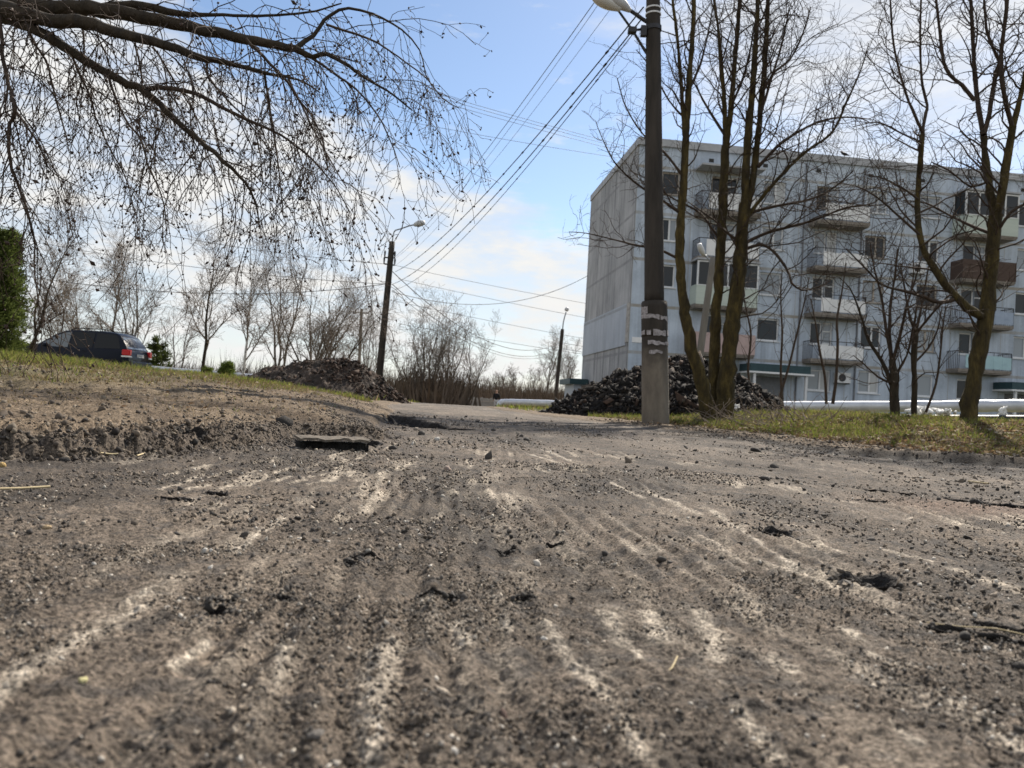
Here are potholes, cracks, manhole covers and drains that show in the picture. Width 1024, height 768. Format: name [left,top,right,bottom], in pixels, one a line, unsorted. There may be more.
crack [927,621,1024,644]
crack [854,488,916,503]
pothole [372,412,472,430]
pothole [839,571,898,592]
crack [947,499,1024,509]
